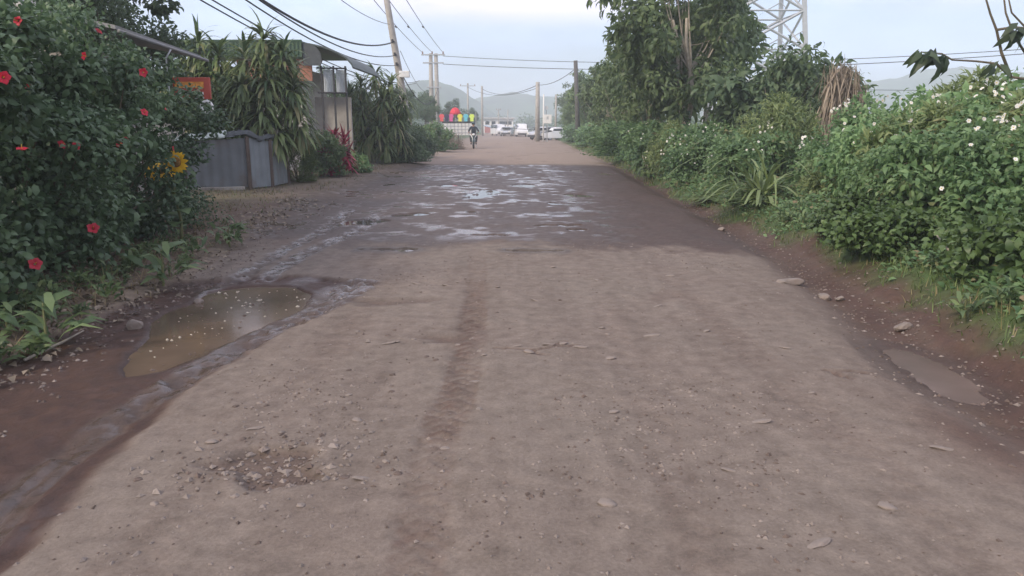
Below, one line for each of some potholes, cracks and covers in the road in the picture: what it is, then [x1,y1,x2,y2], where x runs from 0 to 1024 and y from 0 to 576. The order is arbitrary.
pothole [118,284,315,379]
pothole [461,189,502,199]
pothole [871,341,1002,407]
pothole [189,445,332,491]
